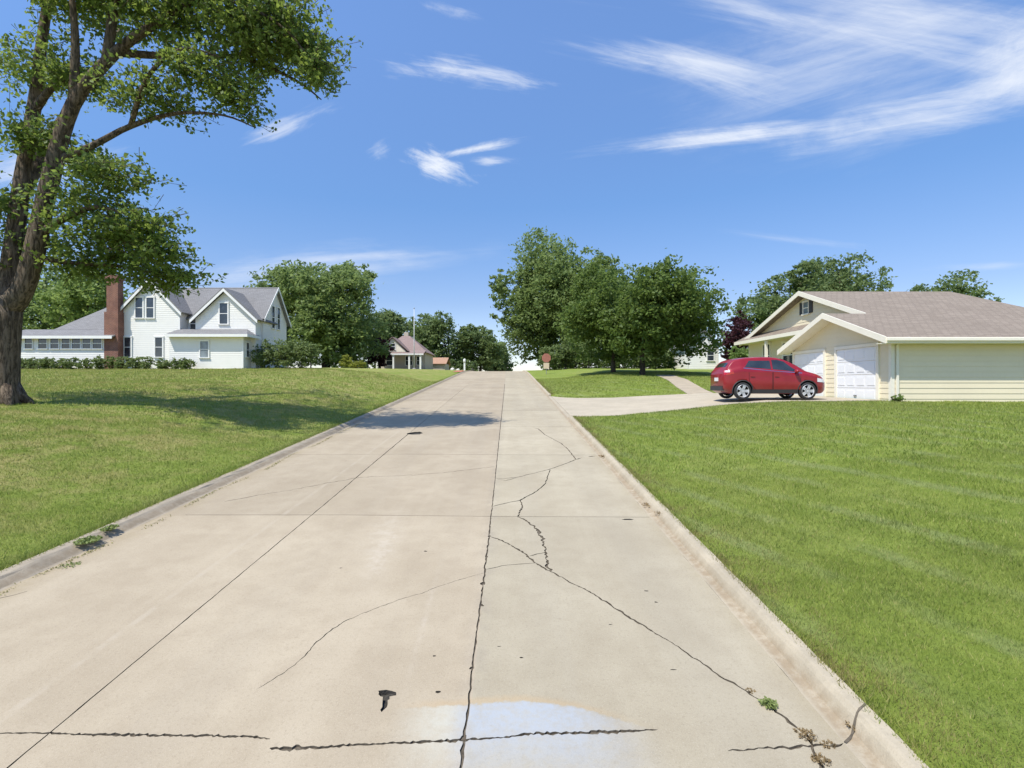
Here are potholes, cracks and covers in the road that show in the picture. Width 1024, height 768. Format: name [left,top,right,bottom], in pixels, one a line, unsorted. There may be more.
crack [0,729,656,752]
crack [261,576,471,687]
pothole [379,690,396,712]
crack [489,428,866,768]
